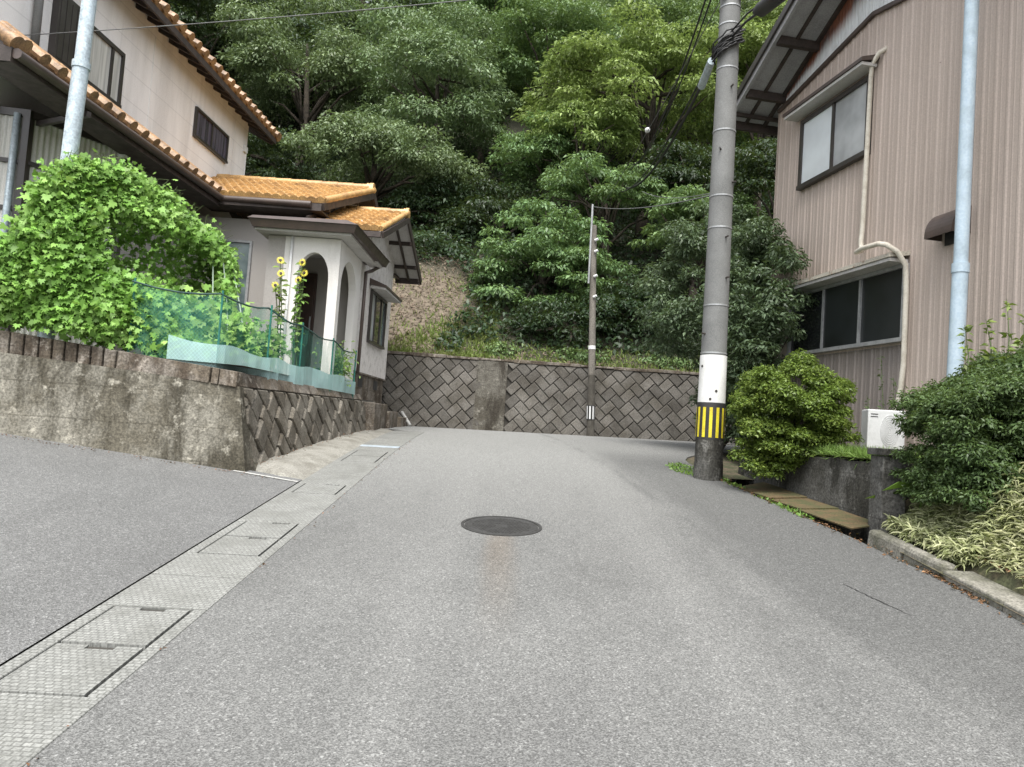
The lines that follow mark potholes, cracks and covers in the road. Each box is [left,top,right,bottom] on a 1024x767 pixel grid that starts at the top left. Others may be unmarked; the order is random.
manhole cover [461,516,542,536]
